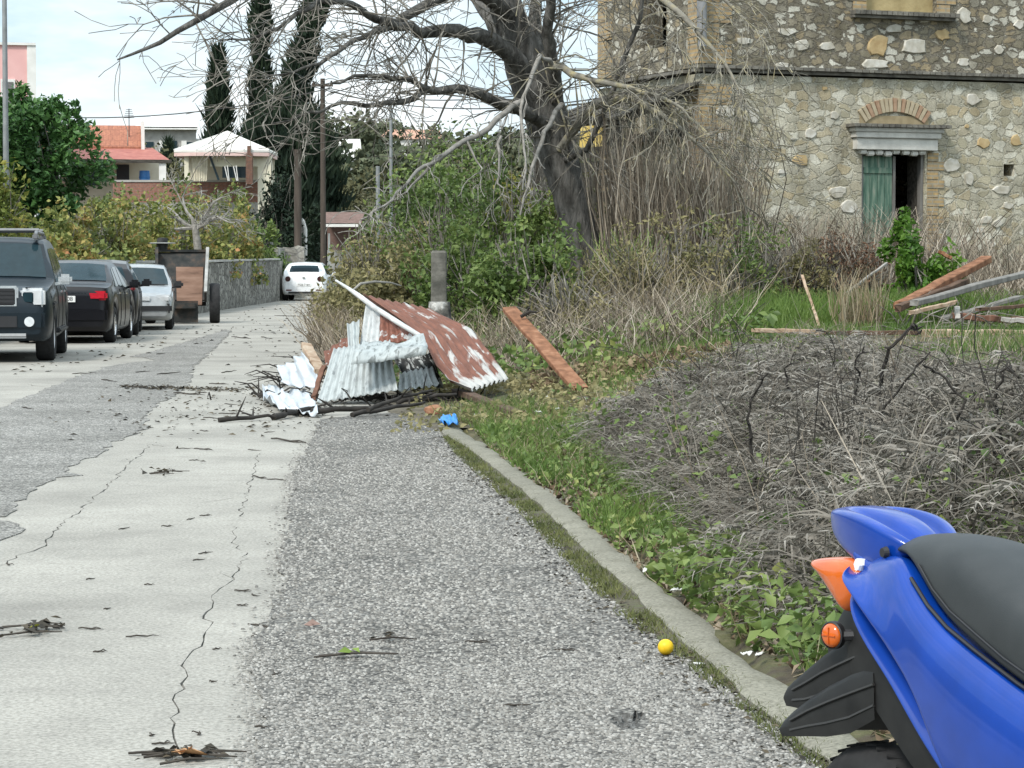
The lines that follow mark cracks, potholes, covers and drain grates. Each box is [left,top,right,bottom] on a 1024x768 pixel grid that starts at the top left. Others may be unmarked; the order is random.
pothole [610,710,648,730]
crack [170,453,260,757]
crack [7,445,163,563]
